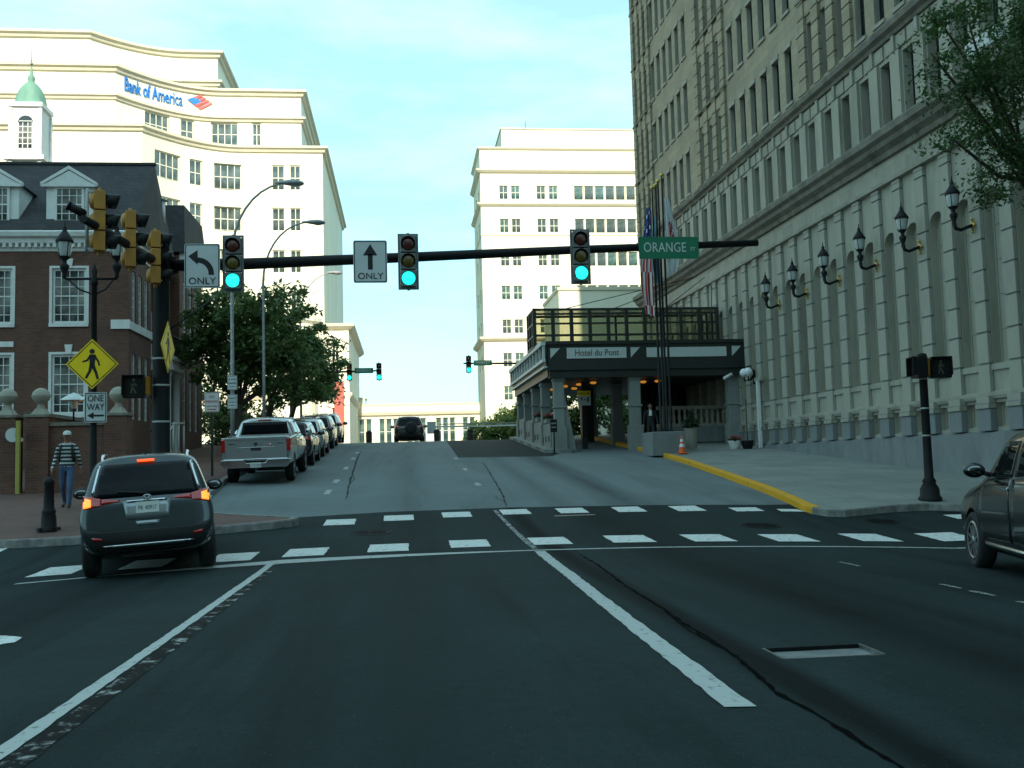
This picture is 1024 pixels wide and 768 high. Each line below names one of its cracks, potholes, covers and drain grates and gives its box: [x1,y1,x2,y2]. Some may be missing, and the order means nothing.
crack [482,462,522,508]
manhole cover [761,643,886,659]
crack [345,451,361,499]
crack [555,547,904,768]
